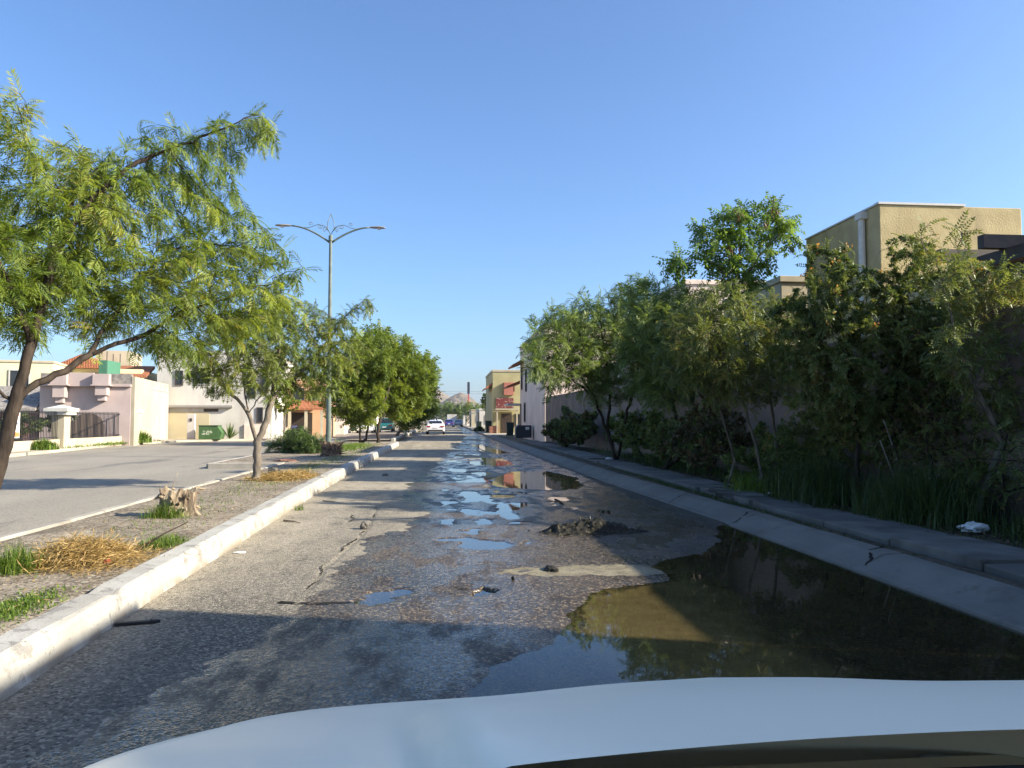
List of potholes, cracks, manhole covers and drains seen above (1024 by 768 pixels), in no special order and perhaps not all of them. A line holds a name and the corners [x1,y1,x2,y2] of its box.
pothole [465,585,505,599]
